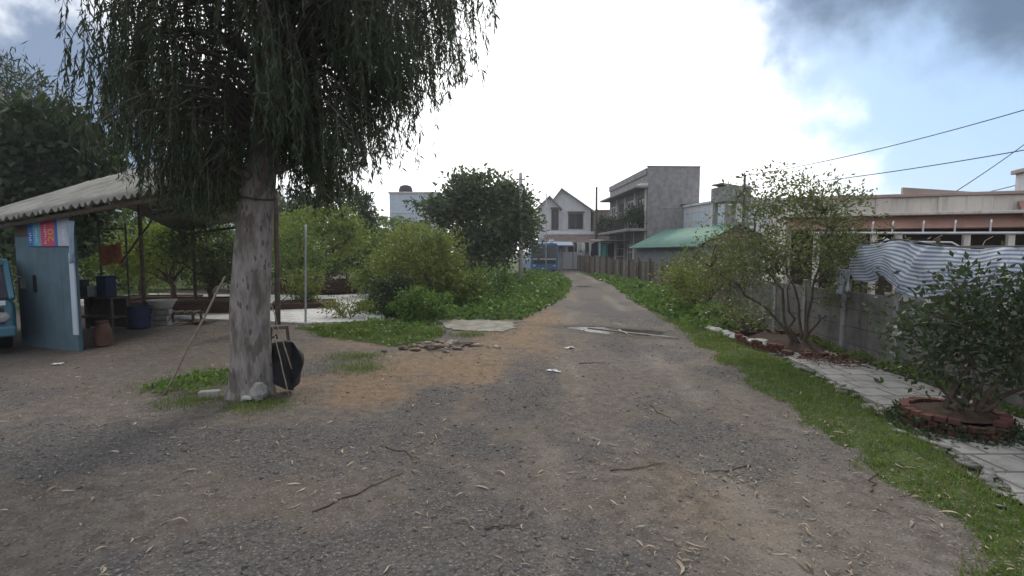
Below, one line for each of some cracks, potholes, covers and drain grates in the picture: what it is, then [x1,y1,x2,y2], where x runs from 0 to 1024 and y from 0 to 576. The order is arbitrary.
pothole [548,325,683,338]
